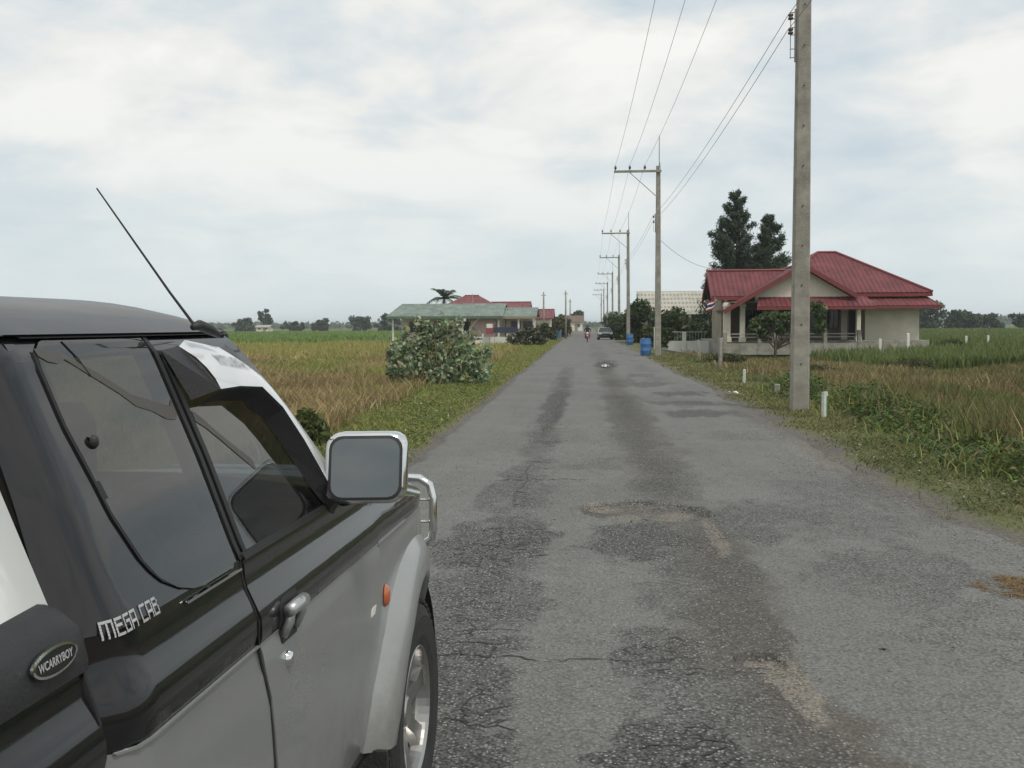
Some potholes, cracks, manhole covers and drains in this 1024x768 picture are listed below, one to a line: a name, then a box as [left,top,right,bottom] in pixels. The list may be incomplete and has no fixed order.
crack [494,461,584,507]
crack [447,680,519,731]
crack [437,601,716,676]
pothole [570,498,727,524]
crack [635,722,743,768]
